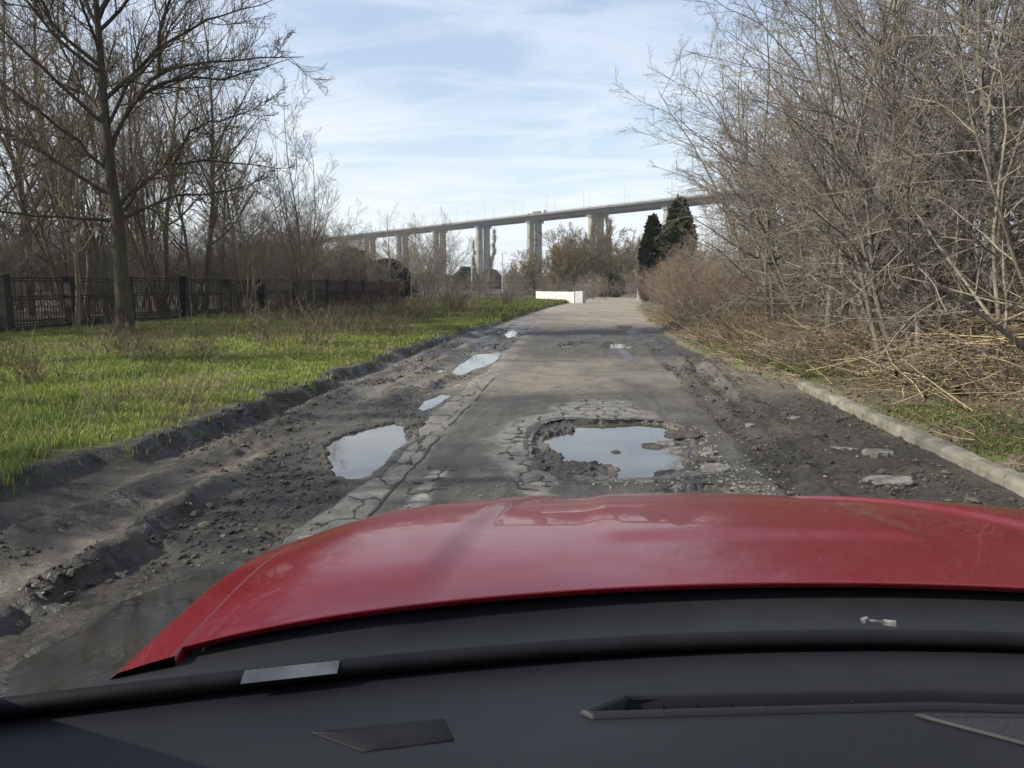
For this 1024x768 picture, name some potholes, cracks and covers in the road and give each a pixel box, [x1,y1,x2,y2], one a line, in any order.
crack [309,356,508,530]
crack [498,397,648,494]
pothole [307,419,420,486]
pothole [523,417,700,486]
